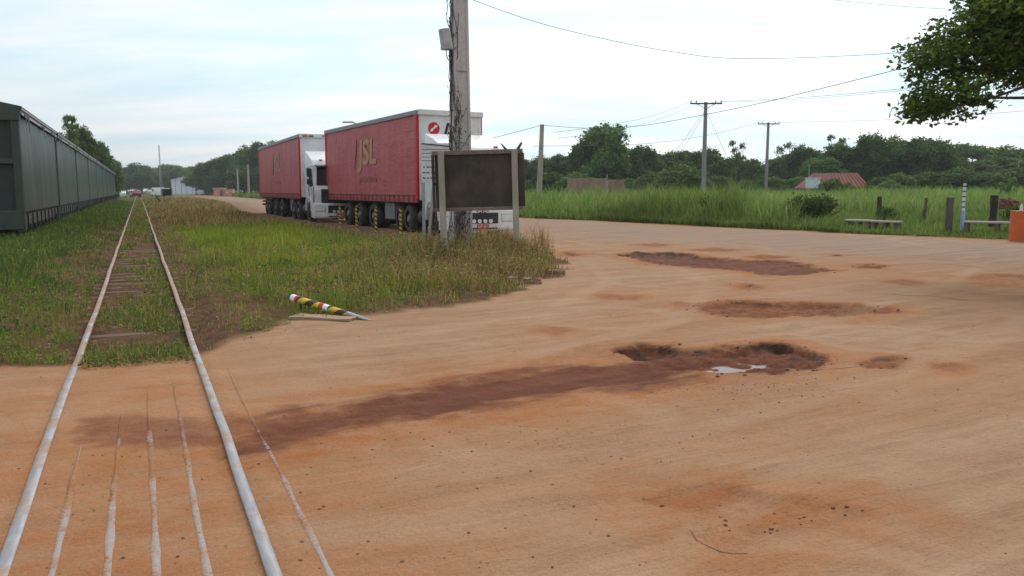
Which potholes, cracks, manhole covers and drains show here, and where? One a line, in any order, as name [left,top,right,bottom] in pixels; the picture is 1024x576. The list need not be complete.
pothole [694,299,902,319]
pothole [608,342,834,376]
pothole [853,354,911,370]
pothole [616,251,847,276]
